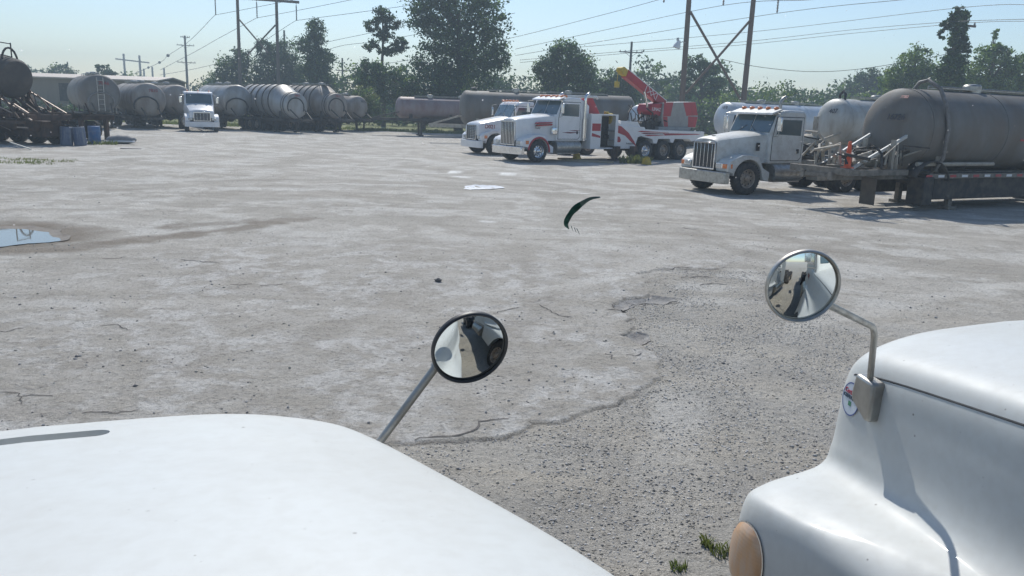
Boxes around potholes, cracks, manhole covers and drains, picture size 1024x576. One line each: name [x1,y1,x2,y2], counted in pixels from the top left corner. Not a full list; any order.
pothole [614,295,676,311]
pothole [626,332,651,346]
